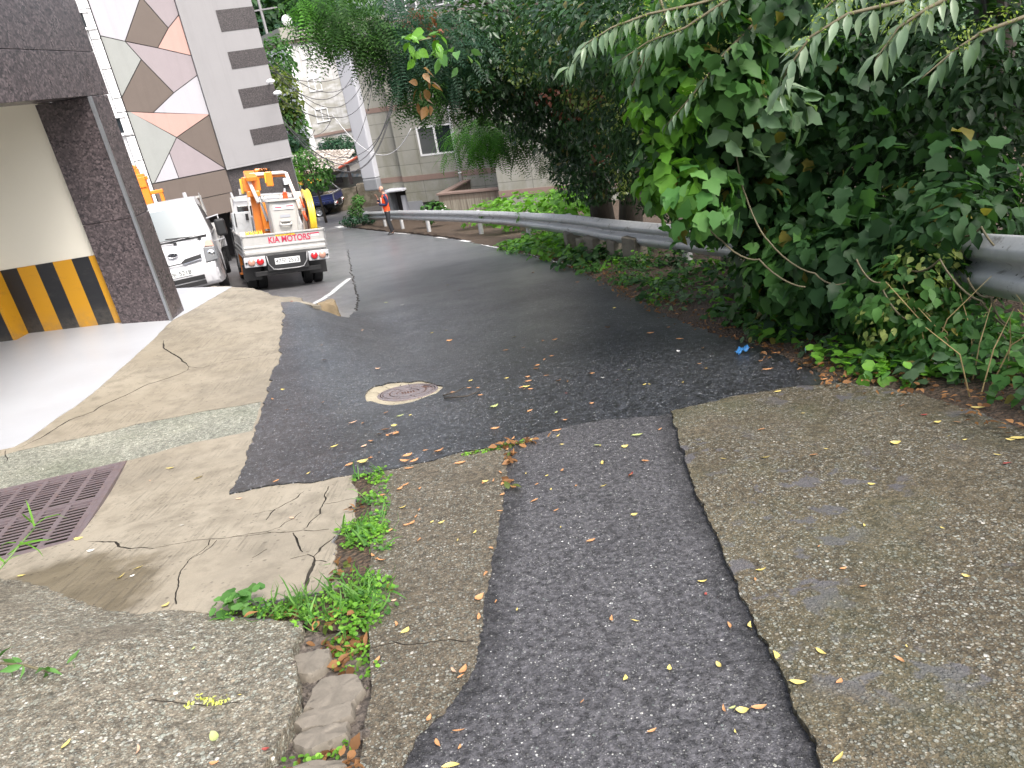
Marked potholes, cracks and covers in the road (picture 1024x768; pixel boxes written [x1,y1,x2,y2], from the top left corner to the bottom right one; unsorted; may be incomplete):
manhole cover [377,383,438,402]
crack [372,639,473,648]
drain grate [0,460,127,559]
crack [347,250,359,311]
crack [5,341,261,460]
crack [92,487,348,604]
